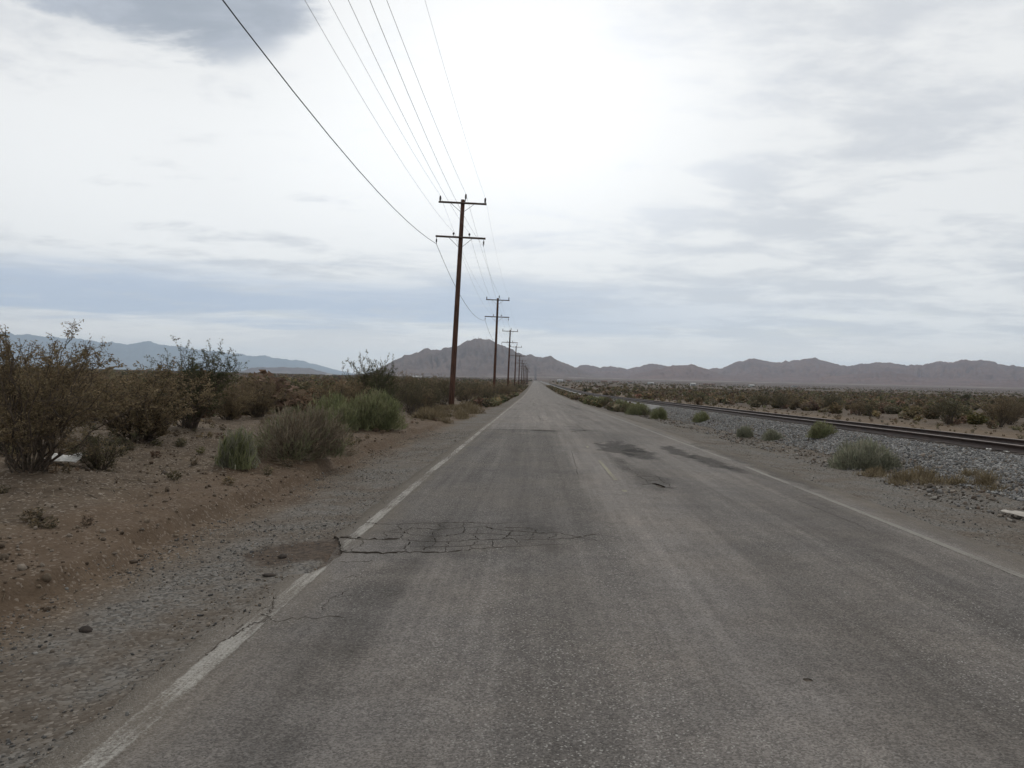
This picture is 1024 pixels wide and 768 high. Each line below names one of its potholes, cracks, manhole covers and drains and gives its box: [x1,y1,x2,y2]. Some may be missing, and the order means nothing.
crack [198,522,597,660]
